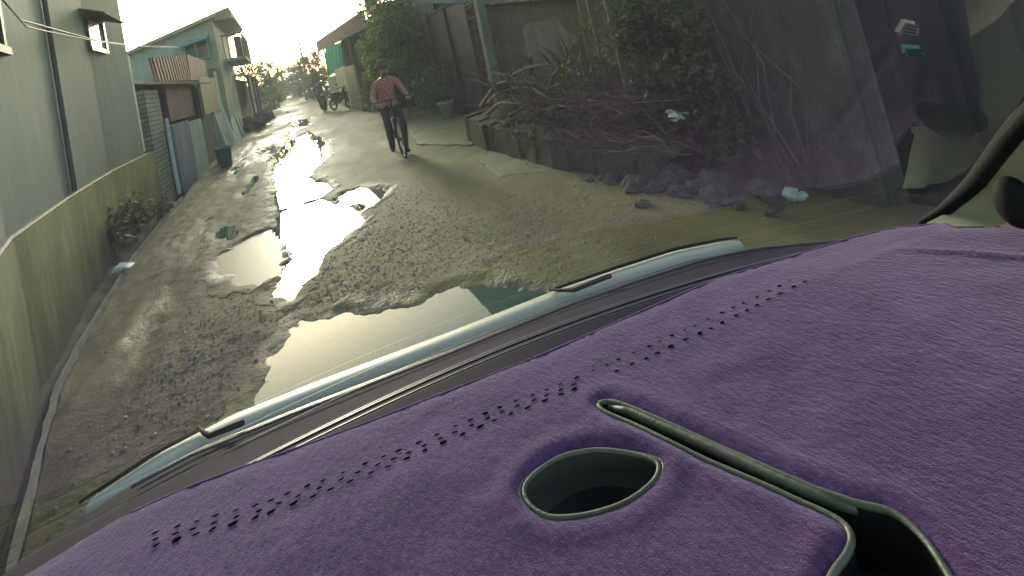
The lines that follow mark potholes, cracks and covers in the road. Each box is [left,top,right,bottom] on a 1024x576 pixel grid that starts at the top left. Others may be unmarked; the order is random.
pothole [218,266,569,422]
pothole [247,194,377,311]
pothole [285,117,315,128]
pothole [198,227,291,299]
pothole [252,141,280,163]
pothole [261,130,342,212]
